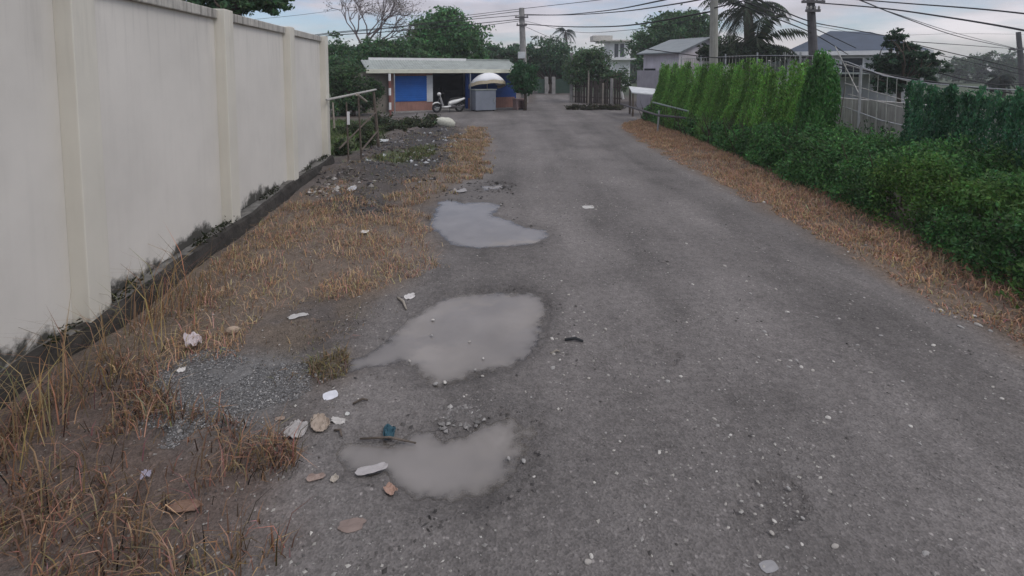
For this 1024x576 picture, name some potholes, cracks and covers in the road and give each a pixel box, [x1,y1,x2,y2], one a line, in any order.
pothole [699,455,844,564]
pothole [318,282,568,401]
pothole [413,181,565,254]
pothole [290,400,572,547]
